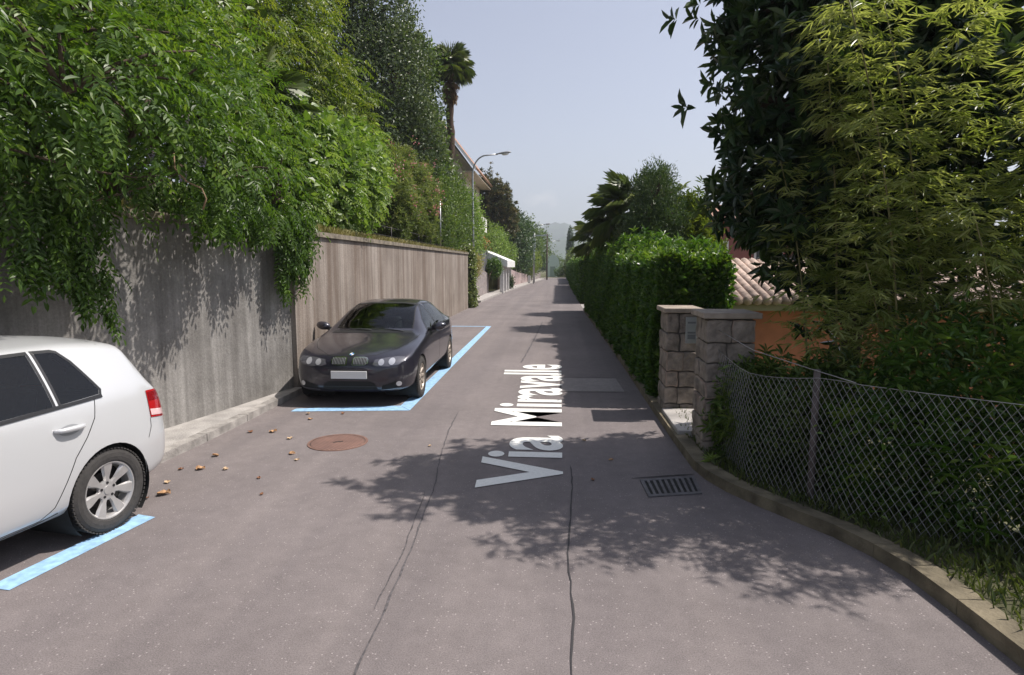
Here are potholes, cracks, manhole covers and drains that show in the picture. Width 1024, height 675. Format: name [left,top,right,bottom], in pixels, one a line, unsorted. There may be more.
drain grate [640,476,702,497]
crack [374,492,425,609]
manhole cover [307,434,368,451]
crack [567,466,575,675]
